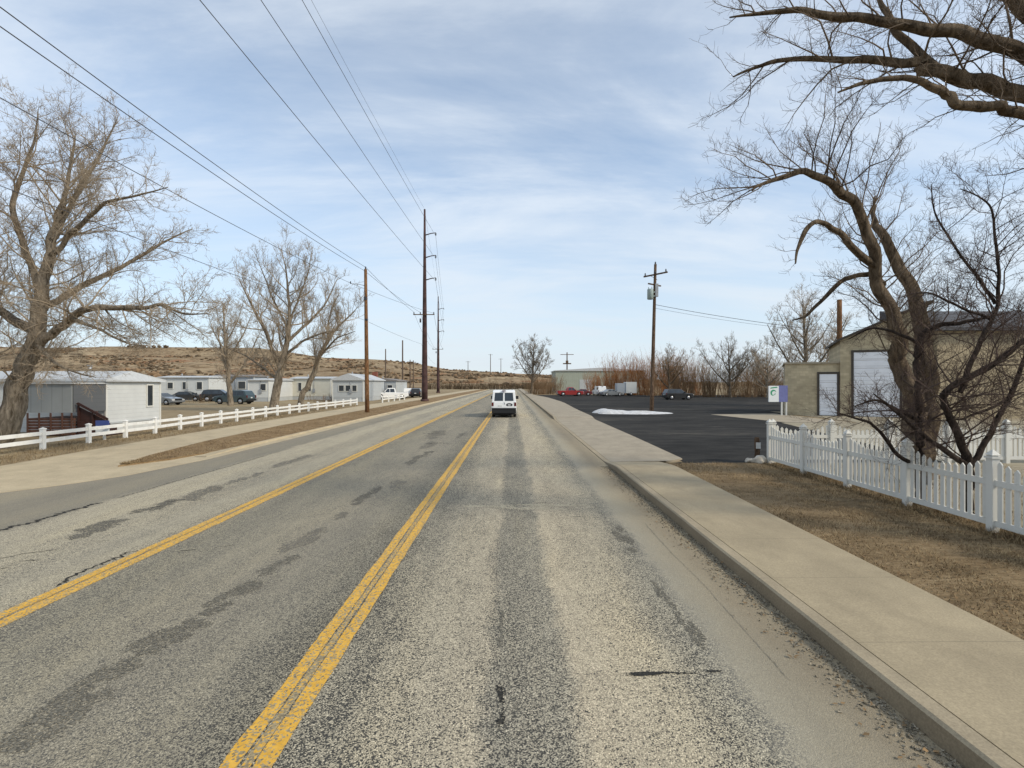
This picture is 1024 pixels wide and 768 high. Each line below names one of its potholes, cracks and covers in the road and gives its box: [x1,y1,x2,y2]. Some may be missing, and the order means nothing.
crack [56,540,138,587]
